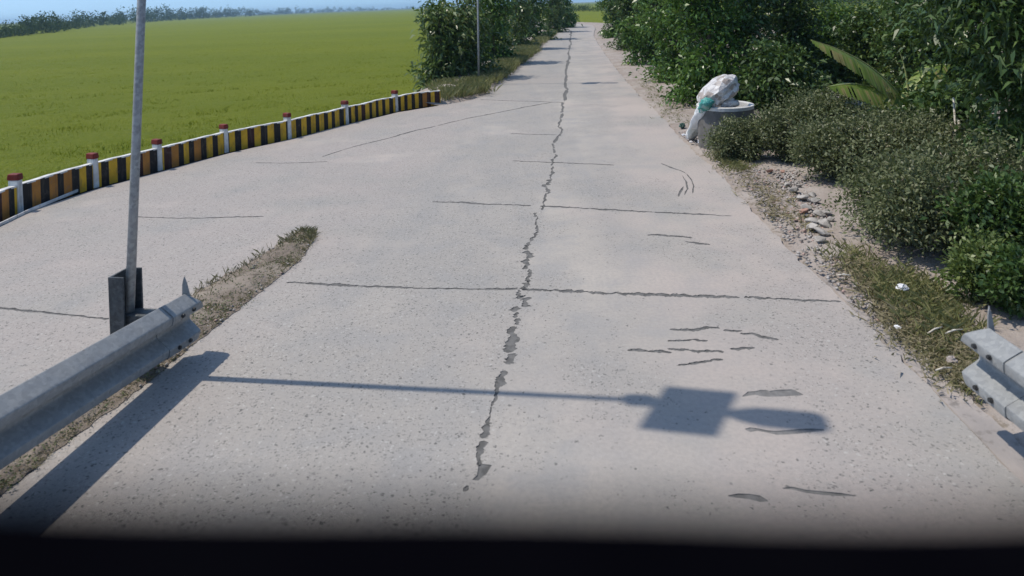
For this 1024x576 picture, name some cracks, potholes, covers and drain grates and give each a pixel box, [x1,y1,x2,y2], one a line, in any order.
crack [728,486,856,502]
crack [287,31,841,491]
